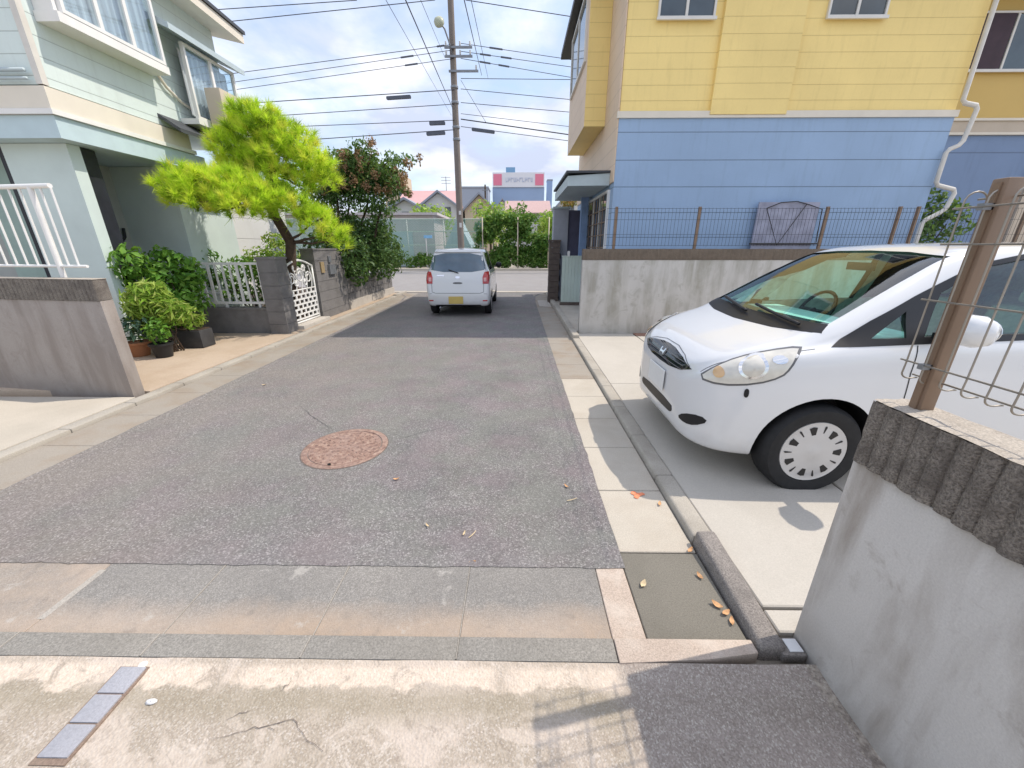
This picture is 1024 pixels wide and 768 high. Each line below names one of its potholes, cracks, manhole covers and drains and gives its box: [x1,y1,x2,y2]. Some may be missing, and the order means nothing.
manhole cover [300,429,389,470]
crack [214,711,323,751]
